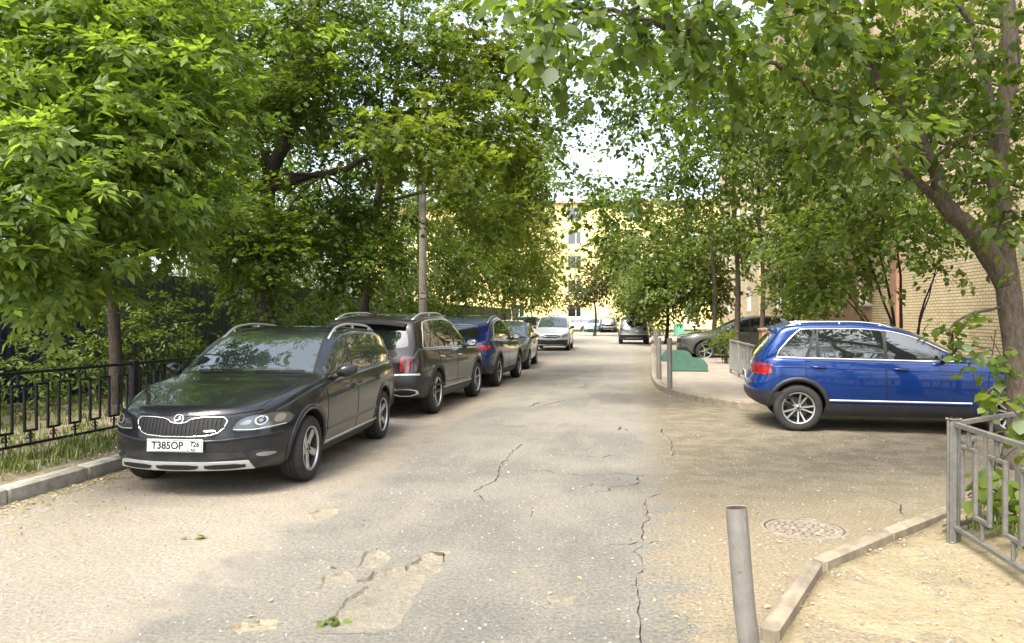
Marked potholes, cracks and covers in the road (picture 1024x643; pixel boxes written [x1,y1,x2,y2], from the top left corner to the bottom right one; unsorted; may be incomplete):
pothole [307,509,339,520]
crack [526,454,661,643]
crack [456,444,522,502]
pothole [226,617,278,635]
manhole cover [759,517,851,540]
pothole [326,551,450,632]
pothole [316,571,355,589]
